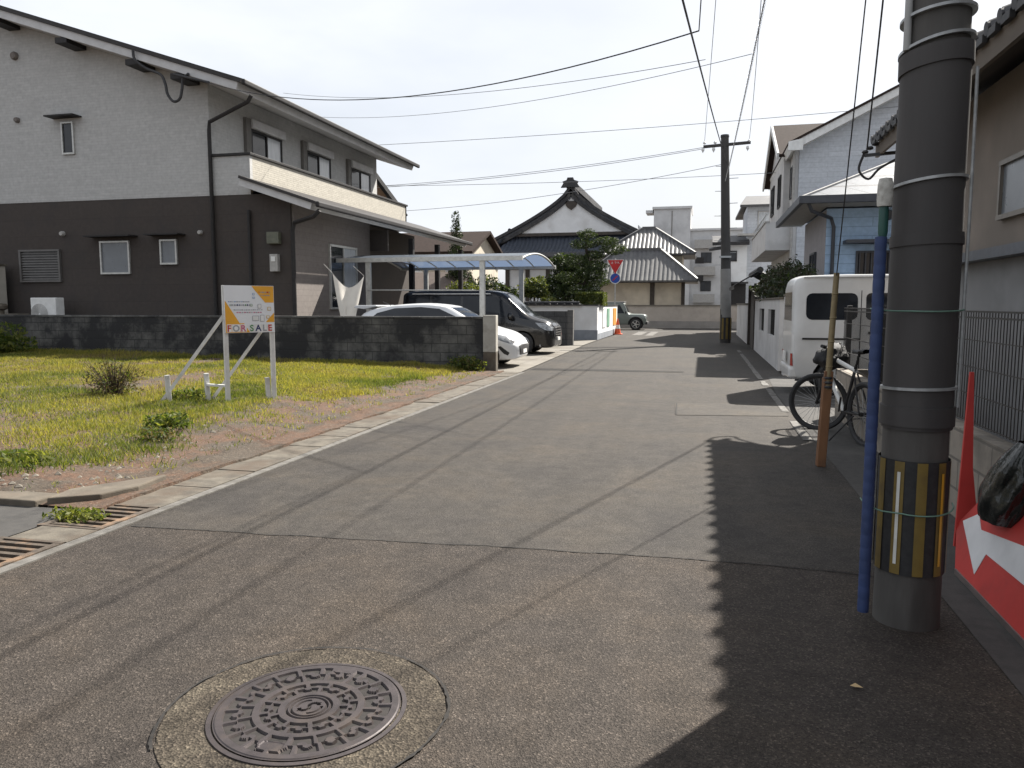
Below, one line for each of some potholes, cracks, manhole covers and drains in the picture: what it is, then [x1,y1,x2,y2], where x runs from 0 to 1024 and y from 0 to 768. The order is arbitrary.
drain grate [0,536,65,568]
drain grate [37,504,159,531]
manhole cover [154,649,446,768]
